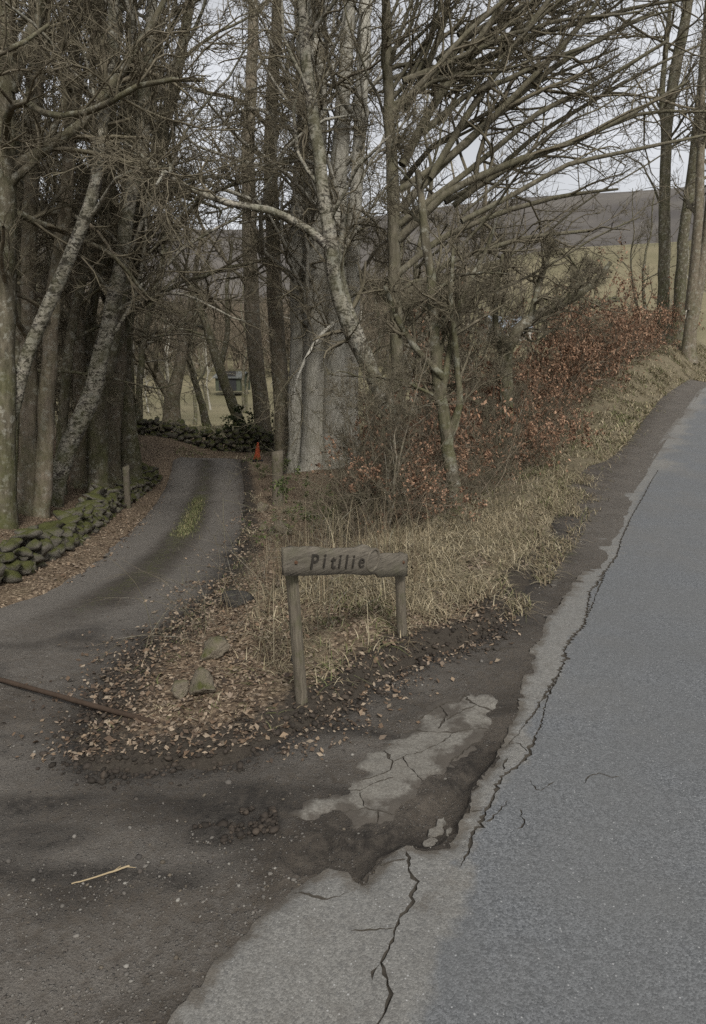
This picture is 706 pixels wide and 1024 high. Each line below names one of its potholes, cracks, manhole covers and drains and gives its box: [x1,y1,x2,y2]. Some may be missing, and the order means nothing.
crack [293,892,348,900]
crack [351,851,420,1024]
crack [344,470,658,866]
pothole [279,740,502,881]
